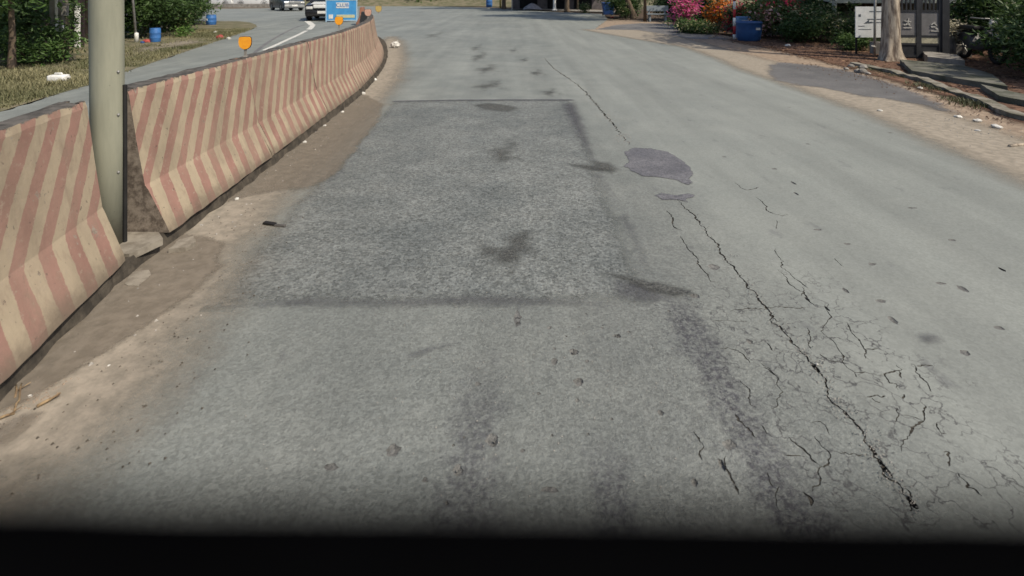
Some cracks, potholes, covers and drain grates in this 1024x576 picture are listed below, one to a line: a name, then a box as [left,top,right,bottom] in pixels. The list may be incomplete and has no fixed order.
crack [668,203,945,501]
crack [547,61,630,144]
